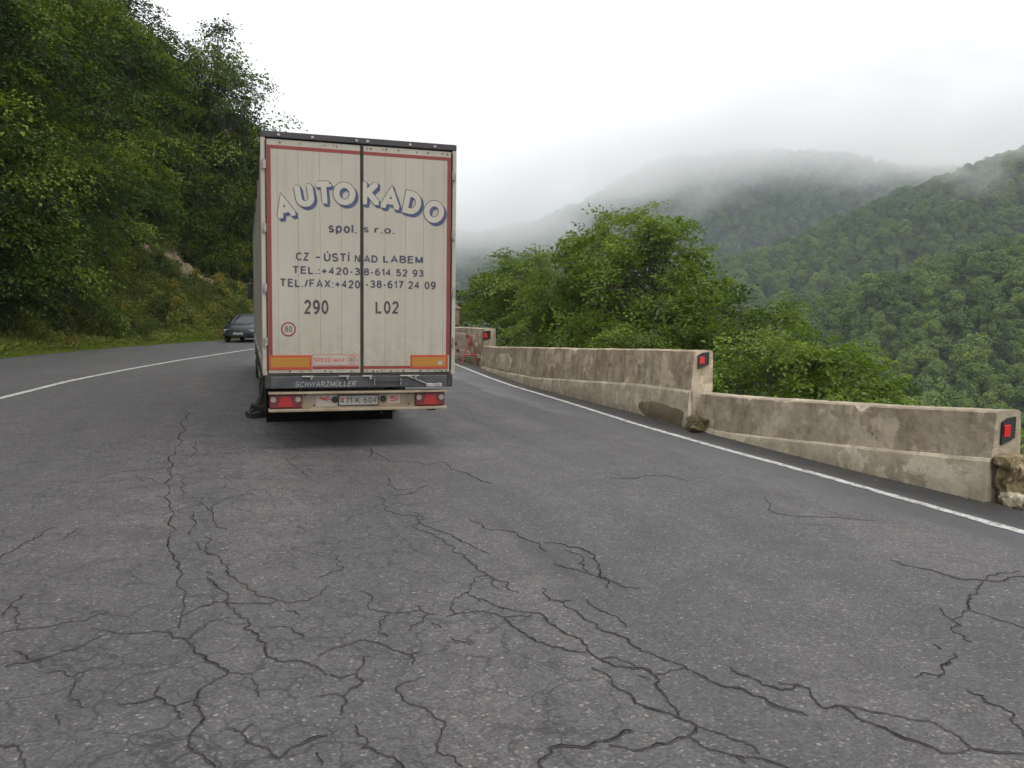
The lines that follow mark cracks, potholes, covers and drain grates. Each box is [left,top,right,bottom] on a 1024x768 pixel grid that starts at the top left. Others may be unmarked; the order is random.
crack [0,403,1024,768]
